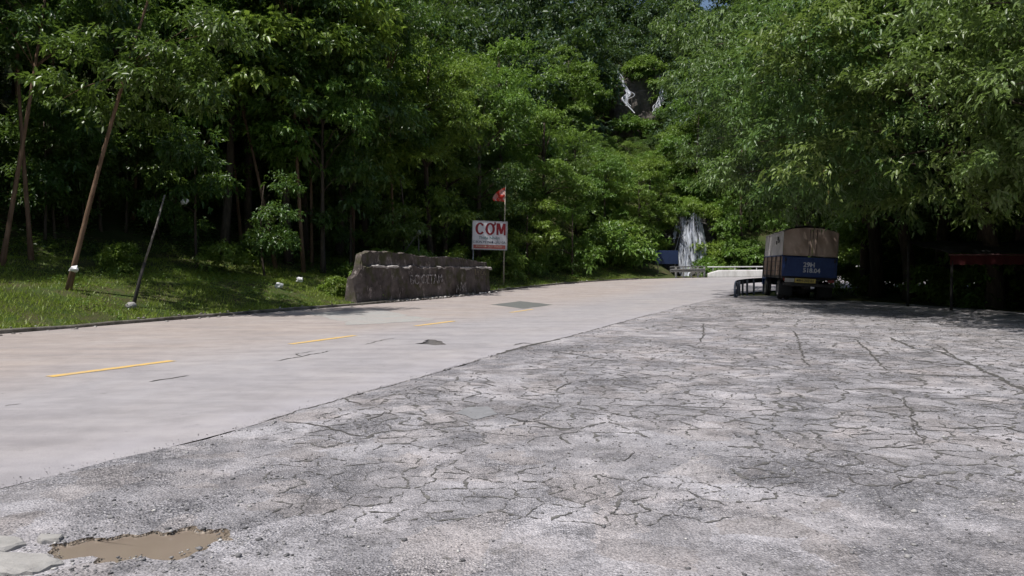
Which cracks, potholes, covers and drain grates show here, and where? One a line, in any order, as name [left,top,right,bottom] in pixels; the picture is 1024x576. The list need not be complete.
crack [253,299,1024,526]
pothole [47,526,233,564]
